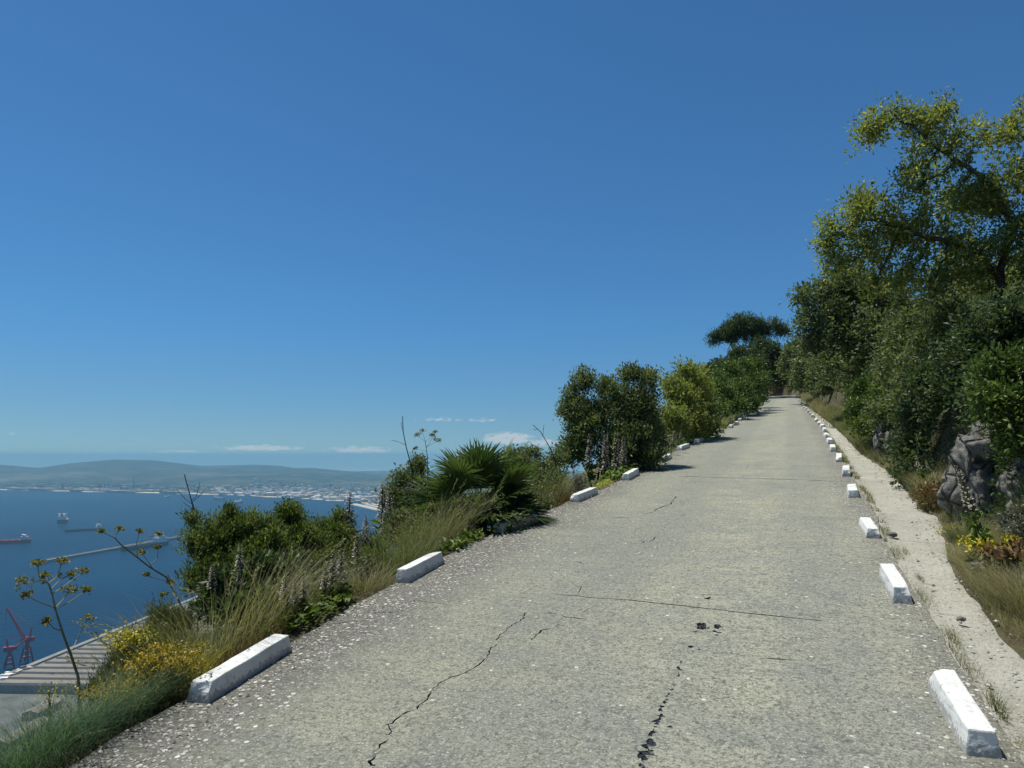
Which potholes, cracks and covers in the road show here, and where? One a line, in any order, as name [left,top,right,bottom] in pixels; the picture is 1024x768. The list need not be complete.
crack [368,586,588,766]
